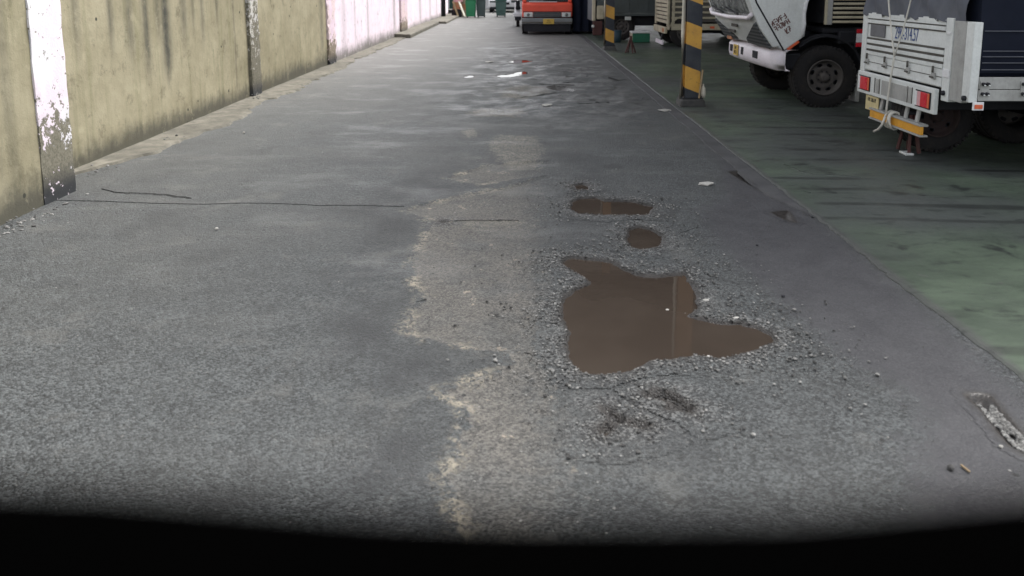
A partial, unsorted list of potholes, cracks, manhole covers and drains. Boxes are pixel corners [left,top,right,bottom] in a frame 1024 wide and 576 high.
pothole [552,178,611,193]
crack [55,189,404,207]
pothole [600,220,691,259]
pothole [722,170,762,192]
pothole [526,247,815,390]
pothole [949,386,1024,461]
pothole [764,209,804,225]
pothole [547,192,679,222]
